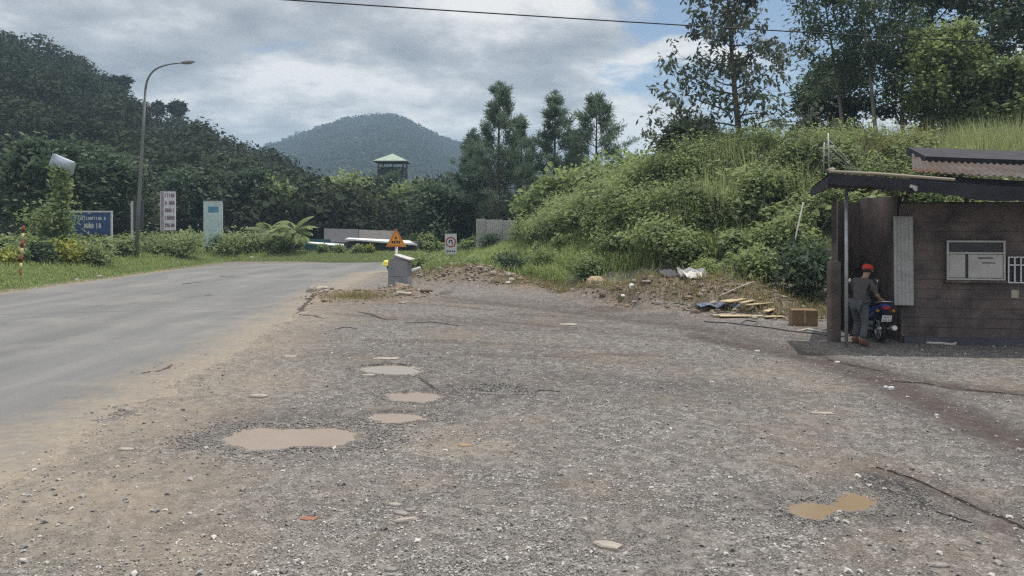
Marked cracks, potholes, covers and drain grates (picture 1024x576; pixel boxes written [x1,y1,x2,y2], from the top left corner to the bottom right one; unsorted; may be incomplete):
pothole [354,410,441,424]
crack [876,466,1024,529]
pothole [192,423,381,455]
pothole [377,389,450,403]
crack [296,294,458,329]
pothole [778,489,886,522]
pothole [345,363,435,376]
